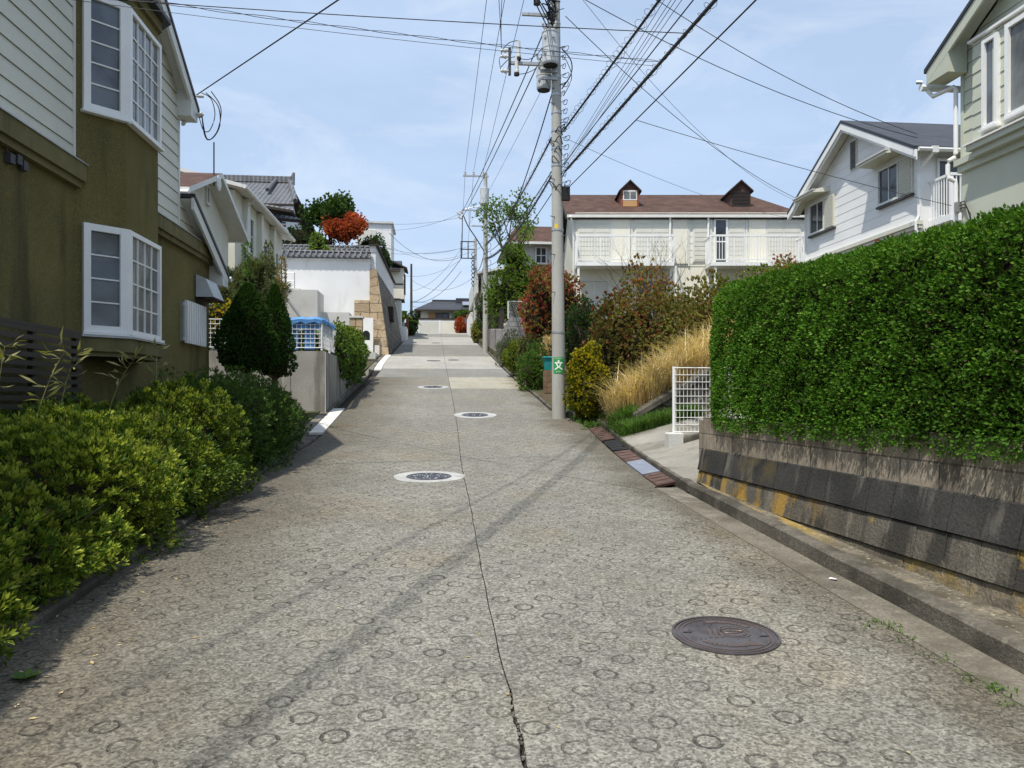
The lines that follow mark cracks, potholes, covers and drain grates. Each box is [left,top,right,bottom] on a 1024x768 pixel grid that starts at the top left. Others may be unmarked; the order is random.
manhole cover [394,471,465,483]
manhole cover [671,616,781,656]
crack [442,345,528,768]
